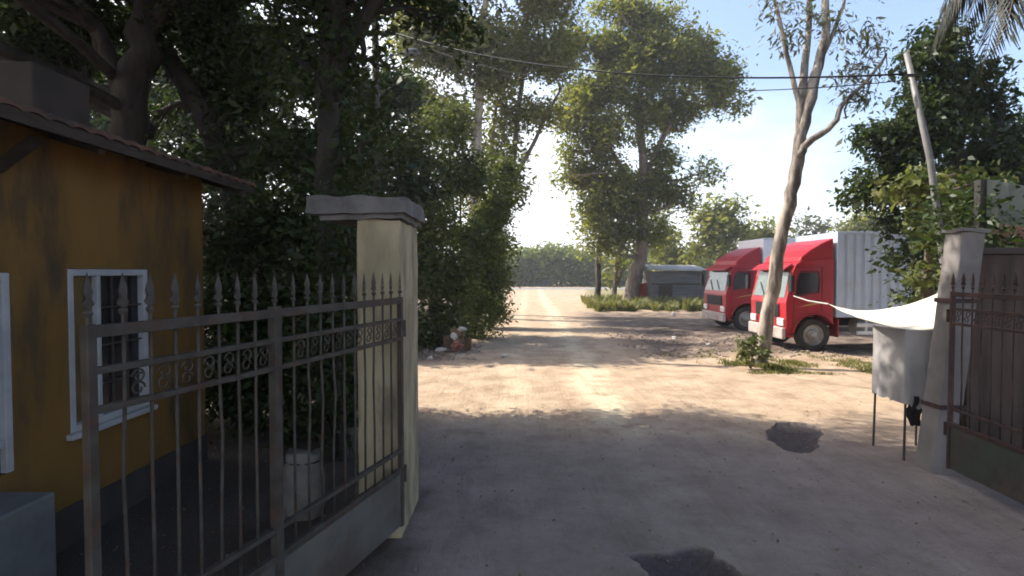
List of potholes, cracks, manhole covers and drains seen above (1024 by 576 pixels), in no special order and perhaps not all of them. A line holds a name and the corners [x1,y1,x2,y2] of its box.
pothole [626,546,743,576]
pothole [764,422,824,454]
